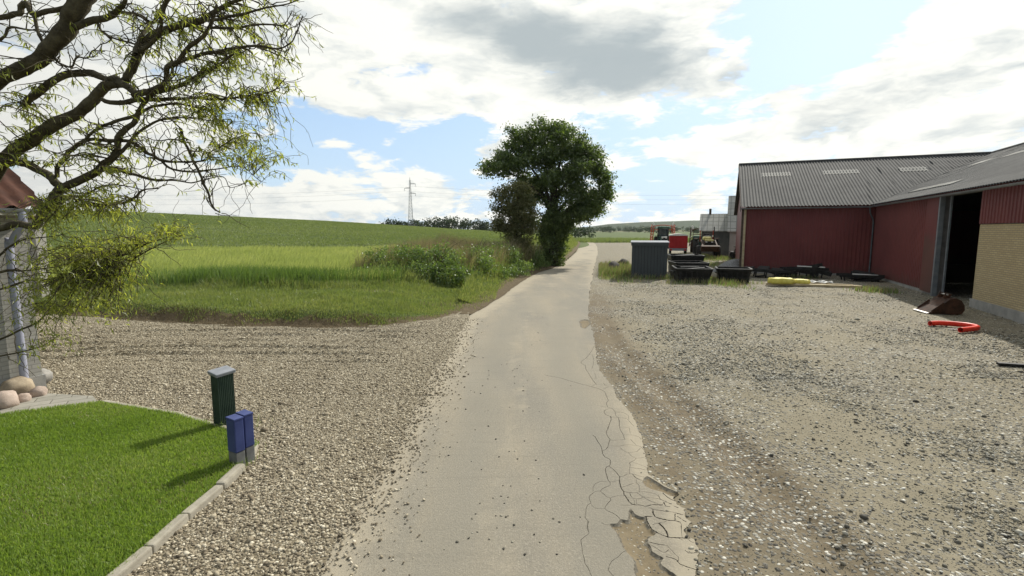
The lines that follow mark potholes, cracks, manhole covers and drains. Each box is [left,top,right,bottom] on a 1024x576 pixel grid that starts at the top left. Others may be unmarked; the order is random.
pothole [610,508,676,576]
crack [547,347,699,574]
